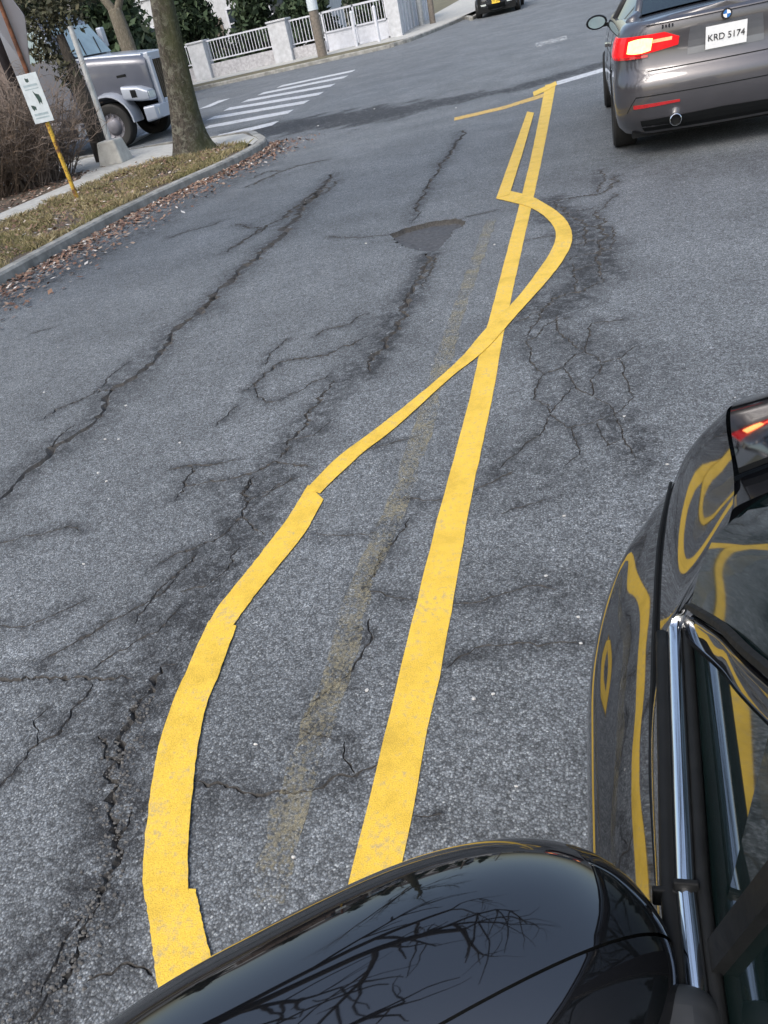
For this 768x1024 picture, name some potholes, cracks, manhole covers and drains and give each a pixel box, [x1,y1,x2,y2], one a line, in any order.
crack [0,175,380,1024]
crack [474,170,637,514]
pothole [390,218,466,255]
crack [411,131,467,223]
